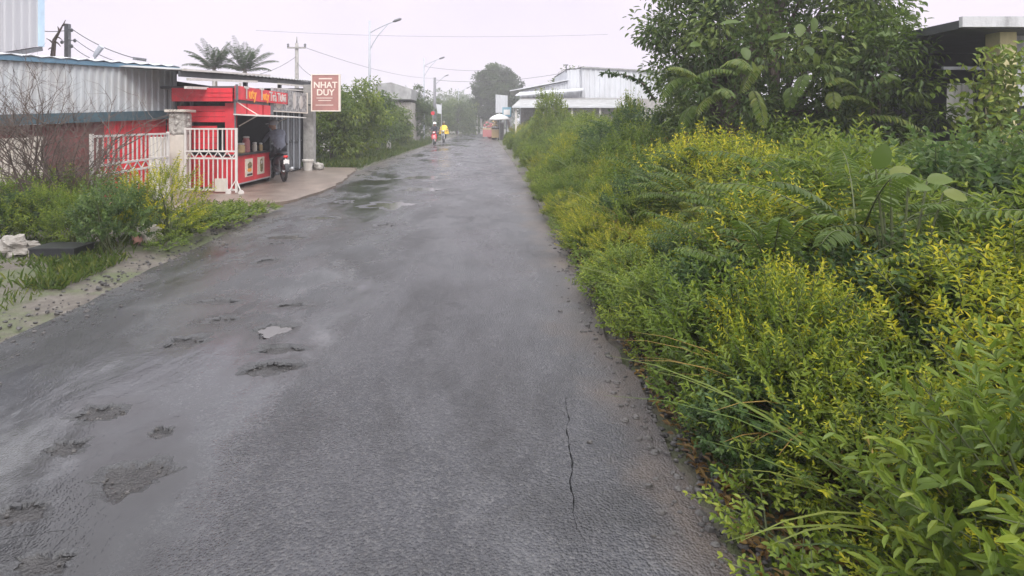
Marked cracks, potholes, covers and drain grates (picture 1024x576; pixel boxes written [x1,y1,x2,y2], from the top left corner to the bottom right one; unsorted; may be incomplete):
pothole [146,425,177,440]
pothole [250,321,303,340]
pothole [0,496,56,527]
pothole [154,332,216,349]
pothole [61,402,132,426]
pothole [234,358,308,378]
pothole [246,343,313,355]
pothole [40,436,95,460]
pothole [84,454,187,505]
crack [565,399,577,530]
pothole [200,315,242,324]
